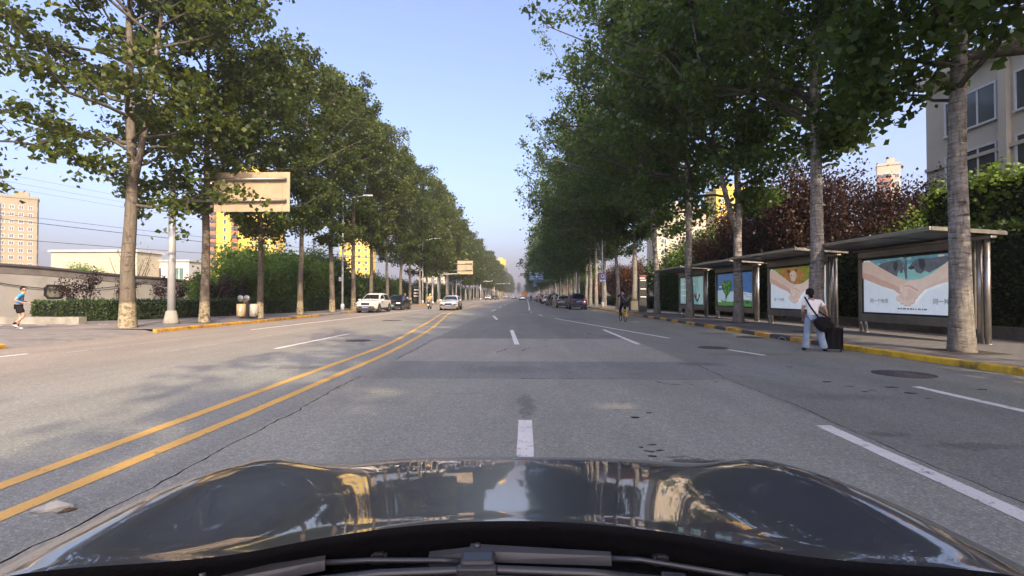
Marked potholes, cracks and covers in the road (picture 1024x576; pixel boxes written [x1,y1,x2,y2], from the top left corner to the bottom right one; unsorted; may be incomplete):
manhole cover [871,370,938,378]
